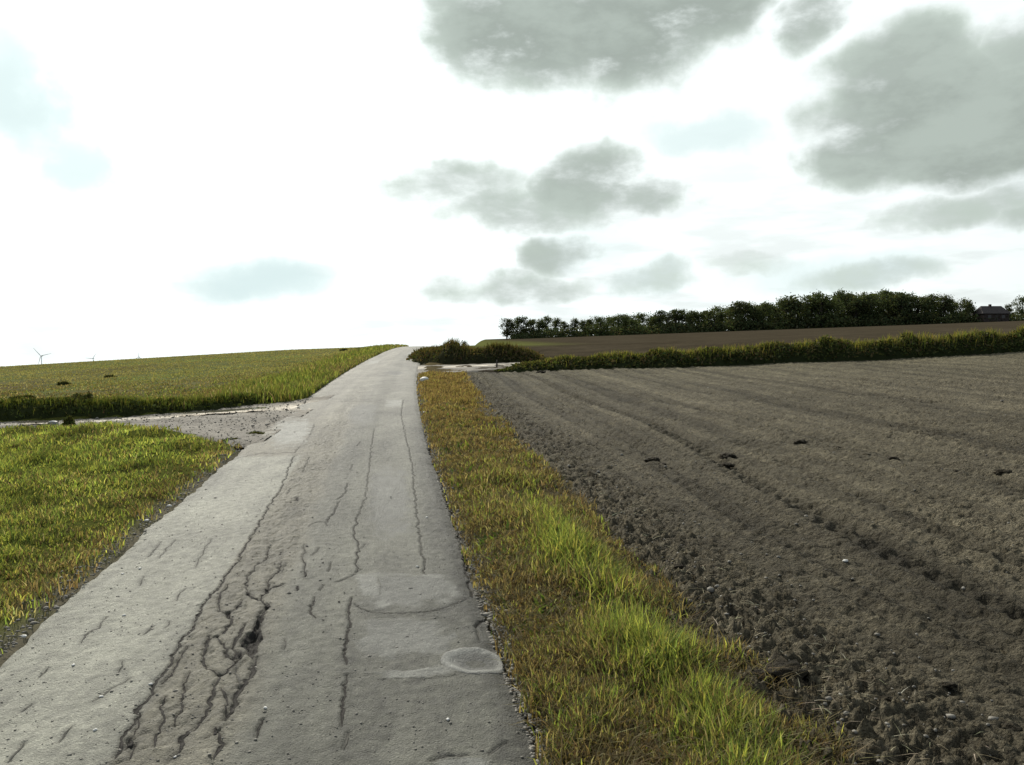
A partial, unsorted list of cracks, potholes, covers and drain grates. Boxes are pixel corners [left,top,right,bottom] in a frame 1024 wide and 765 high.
pothole [241,615,263,659]
crack [81,426,365,760]
crack [355,438,474,614]
